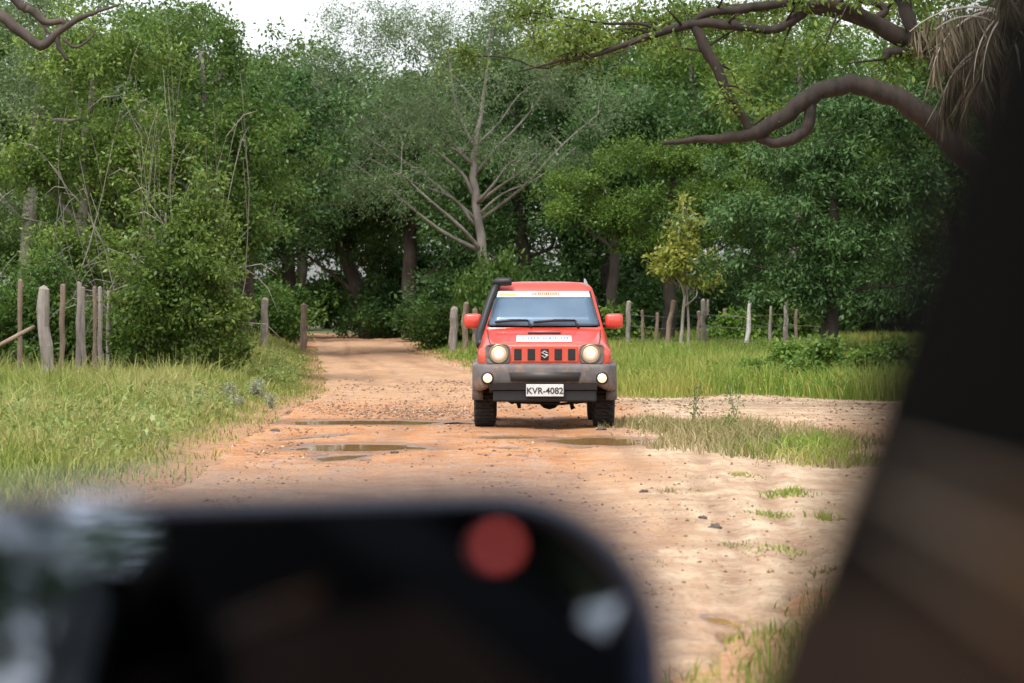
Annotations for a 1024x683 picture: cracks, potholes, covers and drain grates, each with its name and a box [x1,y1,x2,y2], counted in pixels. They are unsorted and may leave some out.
pothole [278,443,439,452]
pothole [536,436,649,447]
pothole [310,453,374,462]
